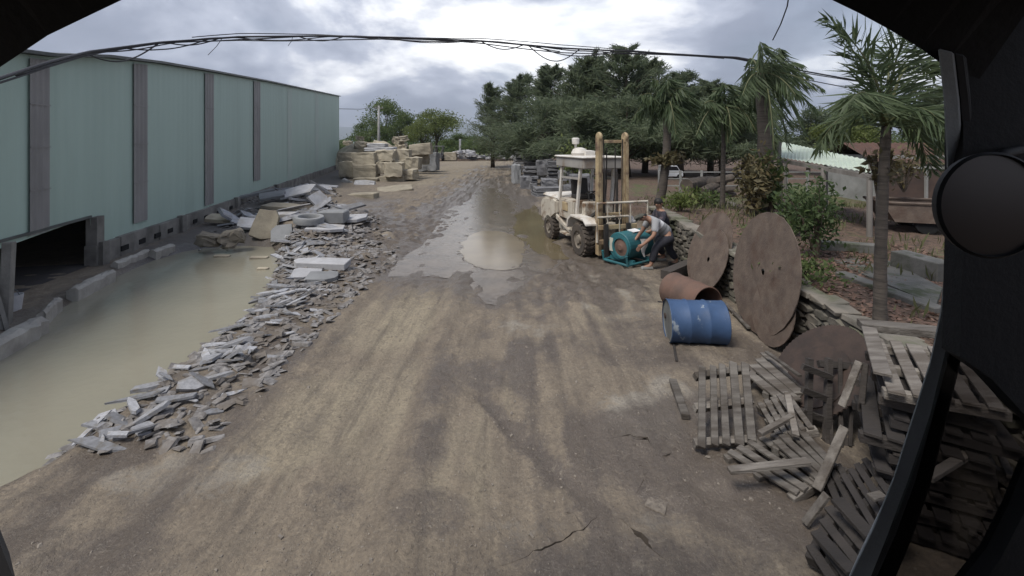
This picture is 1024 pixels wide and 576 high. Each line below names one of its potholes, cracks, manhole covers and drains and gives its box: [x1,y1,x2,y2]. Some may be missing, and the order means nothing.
crack [494,424,692,576]
